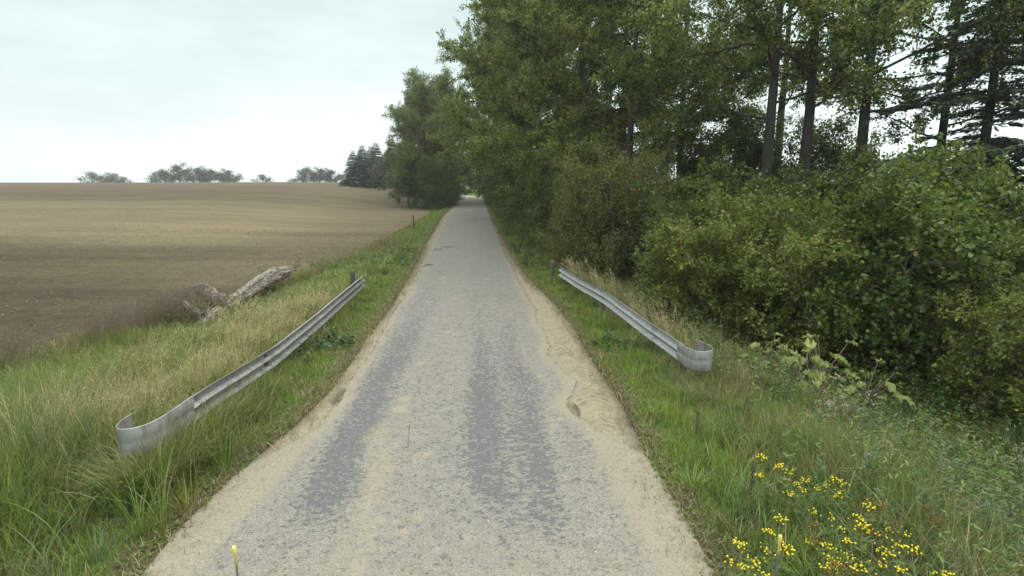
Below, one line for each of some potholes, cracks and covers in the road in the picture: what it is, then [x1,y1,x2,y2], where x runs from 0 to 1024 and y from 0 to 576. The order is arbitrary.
pothole [331,387,345,406]
pothole [567,402,581,419]
